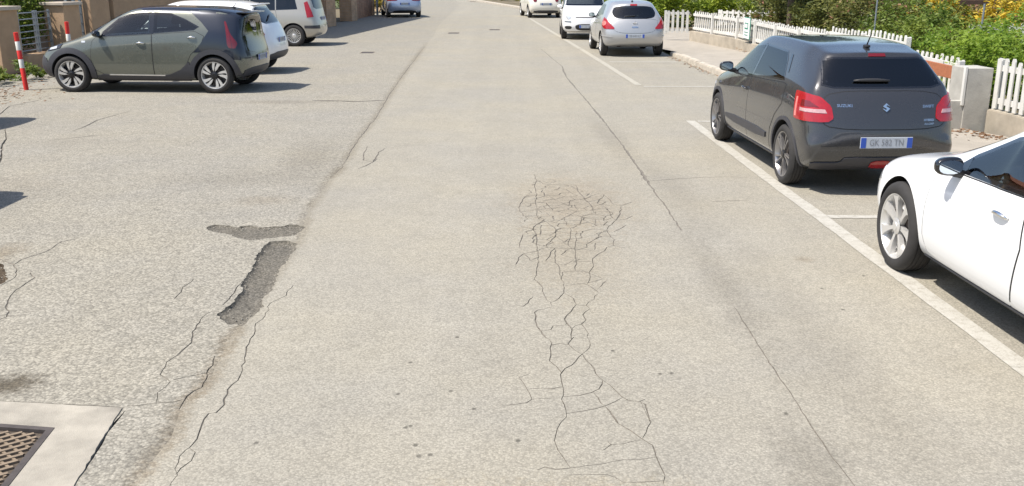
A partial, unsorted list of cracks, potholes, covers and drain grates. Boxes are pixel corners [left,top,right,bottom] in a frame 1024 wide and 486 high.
crack [511,175,665,483]
crack [0,238,77,319]
crack [358,145,404,169]
crack [13,280,293,485]
